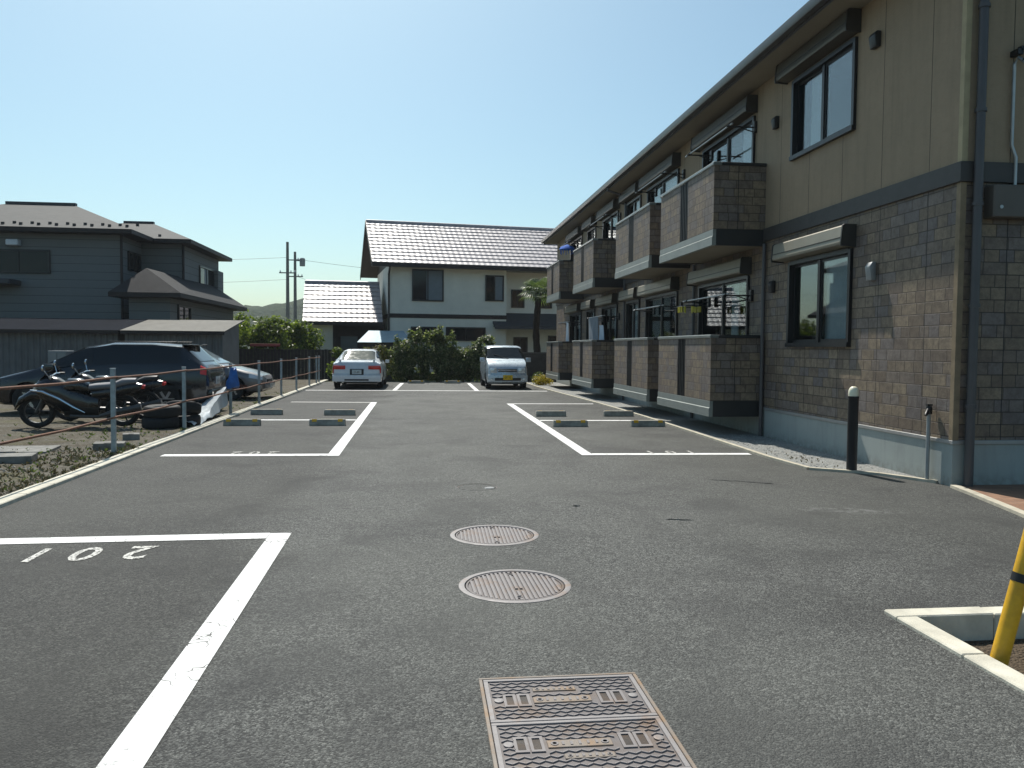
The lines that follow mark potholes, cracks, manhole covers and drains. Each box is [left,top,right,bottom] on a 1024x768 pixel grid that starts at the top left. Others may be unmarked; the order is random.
manhole cover [450,525,539,546]
manhole cover [459,569,571,603]
utility cover [479,672,697,768]
